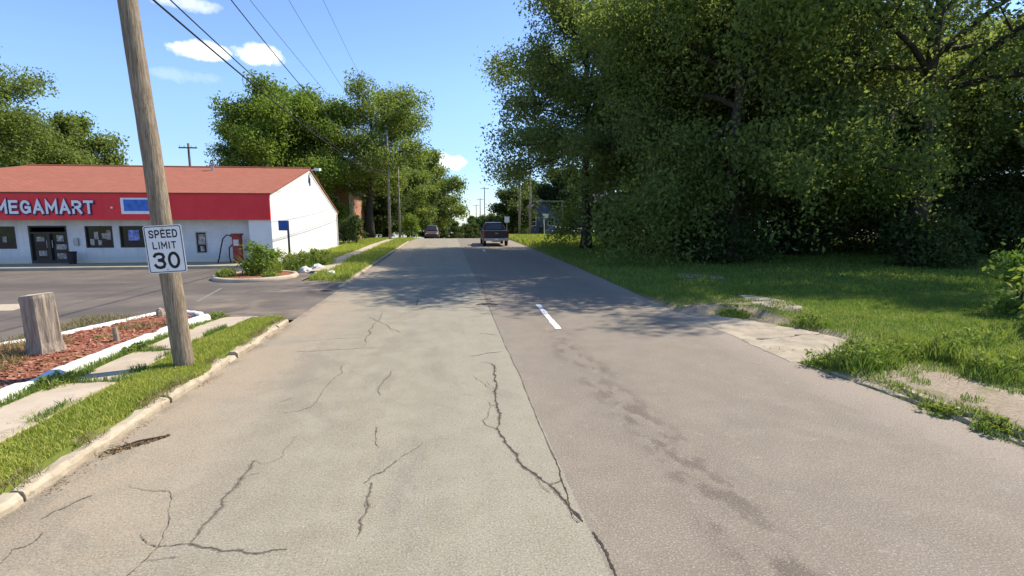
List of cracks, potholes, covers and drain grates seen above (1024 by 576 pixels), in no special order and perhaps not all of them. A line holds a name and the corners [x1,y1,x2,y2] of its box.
crack [357,427,422,536]
crack [291,313,403,412]
crack [126,437,295,576]
crack [474,352,583,522]
crack [1,495,92,563]
